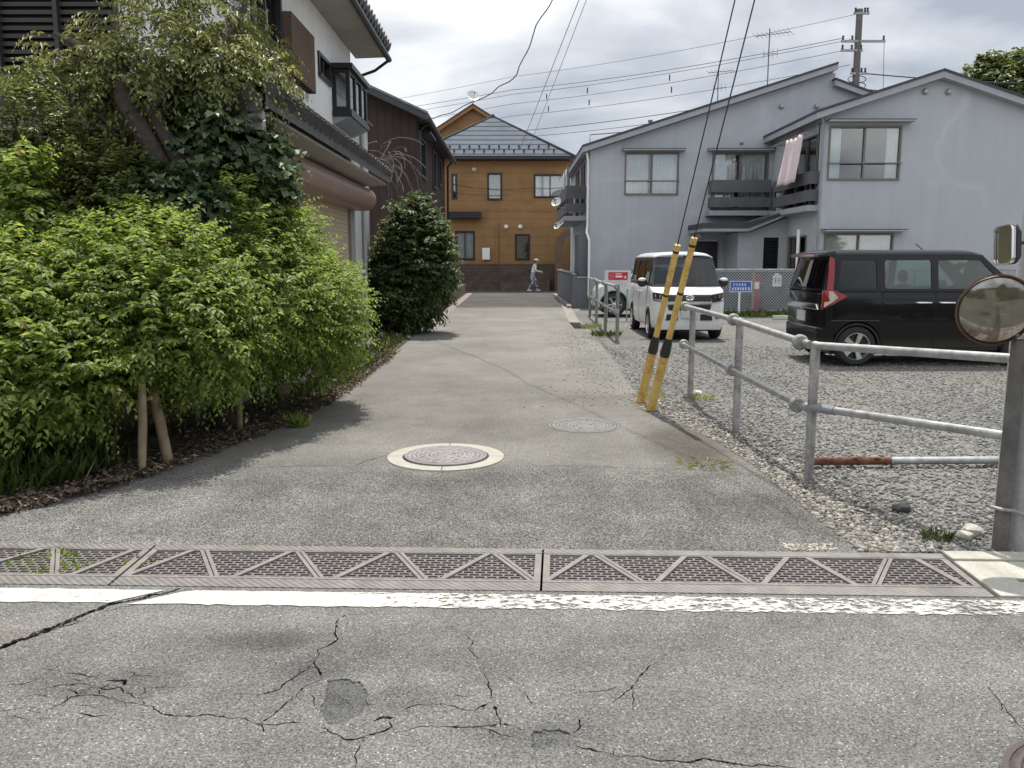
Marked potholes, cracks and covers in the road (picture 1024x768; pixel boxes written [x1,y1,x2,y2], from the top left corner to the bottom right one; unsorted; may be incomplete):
crack [577,720,790,768]
drain grate [110,544,542,592]
manhole cover [387,443,504,472]
crack [14,673,252,723]
crack [258,616,532,764]
drain grate [542,549,995,598]
manhole cover [549,419,620,433]
crack [0,589,179,649]
drain grate [0,542,155,586]
